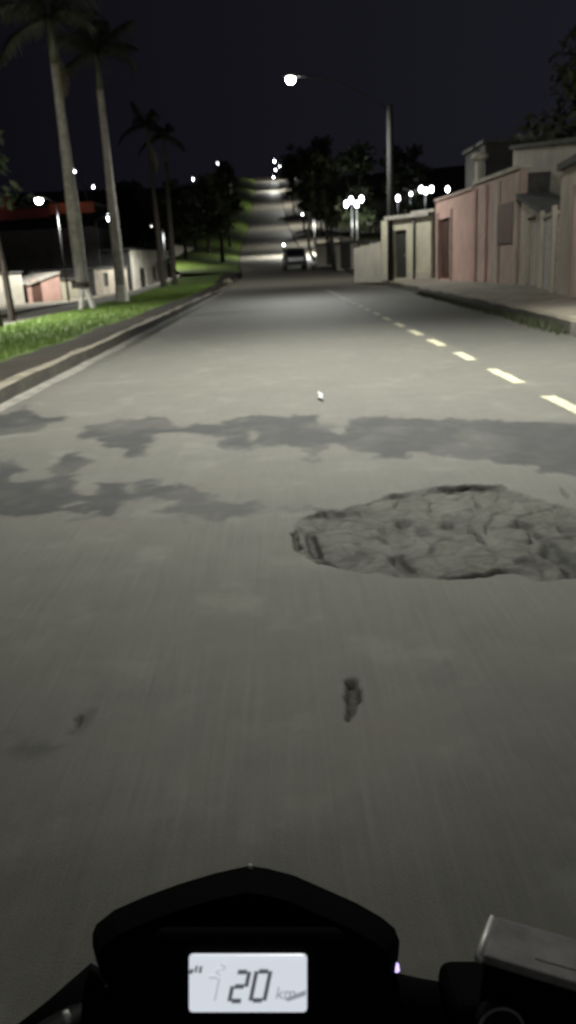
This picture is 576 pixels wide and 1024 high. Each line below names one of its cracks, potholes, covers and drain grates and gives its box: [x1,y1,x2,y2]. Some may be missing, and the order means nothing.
pothole [284,481,576,587]
pothole [64,709,92,735]
pothole [335,675,371,729]
